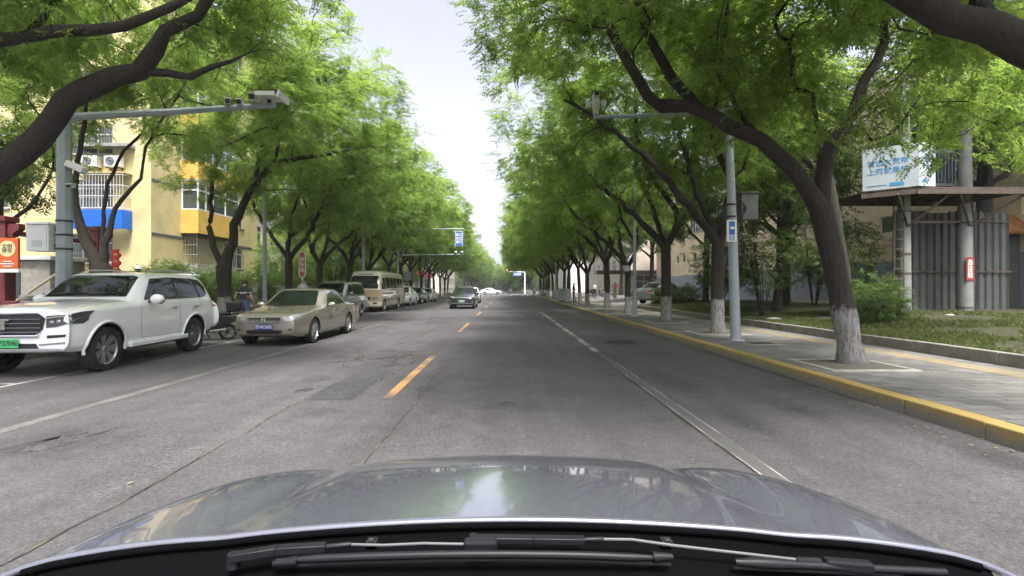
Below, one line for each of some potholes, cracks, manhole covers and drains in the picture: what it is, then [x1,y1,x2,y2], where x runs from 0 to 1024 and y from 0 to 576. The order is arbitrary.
crack [0,402,297,566]
pothole [11,432,89,453]
crack [325,318,451,465]
